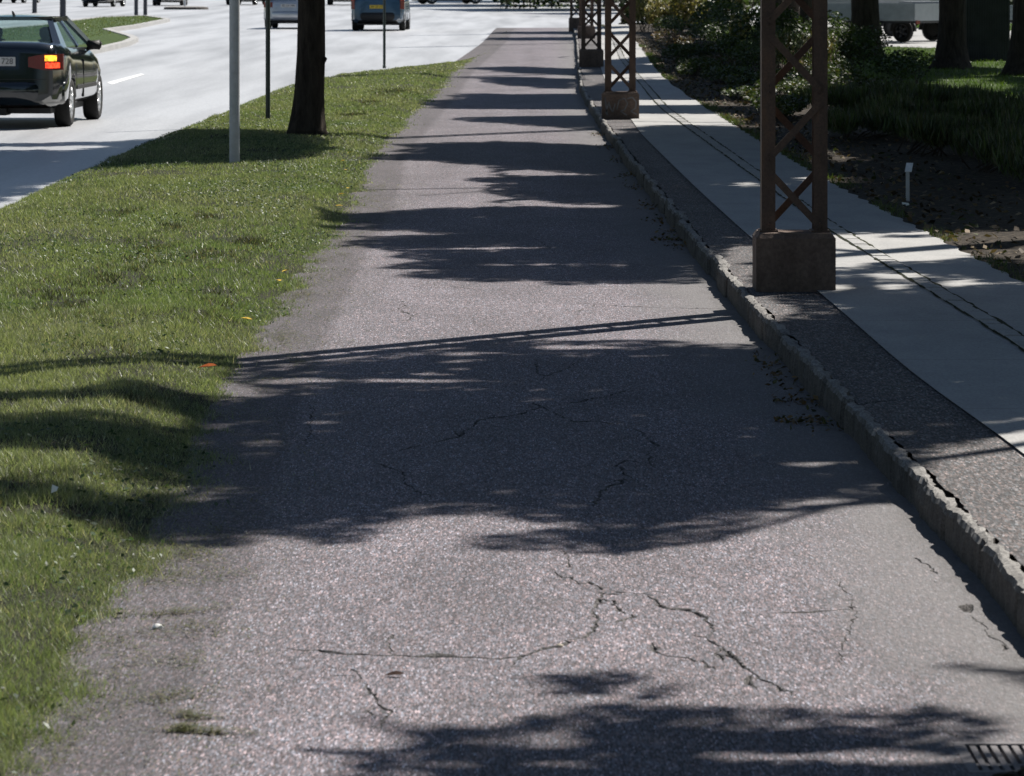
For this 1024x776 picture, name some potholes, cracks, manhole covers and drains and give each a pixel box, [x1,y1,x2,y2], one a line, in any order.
crack [282,550,793,732]
crack [379,391,673,516]
drain grate [952,742,1024,773]
crack [782,580,858,667]
crack [971,616,1009,651]
